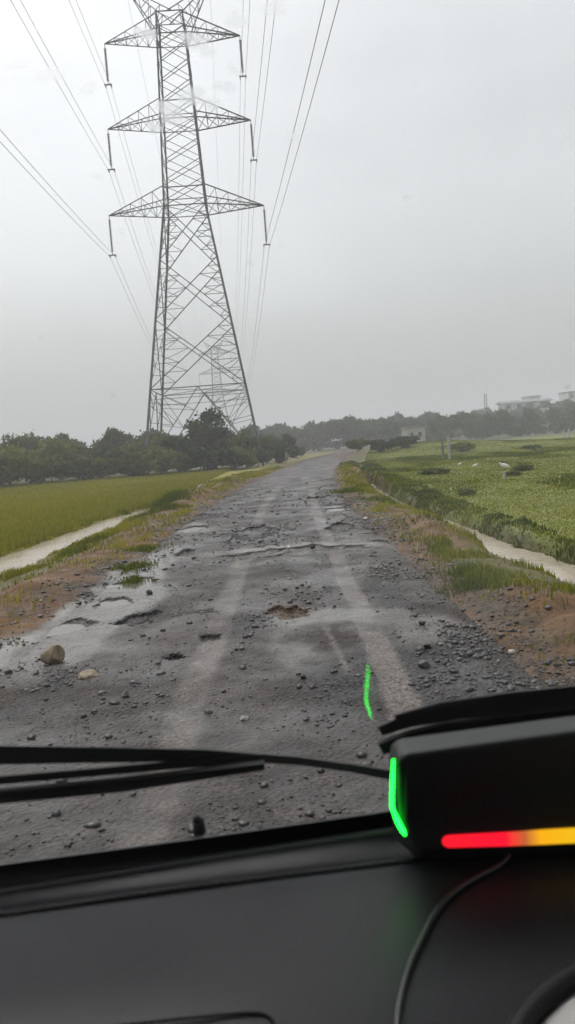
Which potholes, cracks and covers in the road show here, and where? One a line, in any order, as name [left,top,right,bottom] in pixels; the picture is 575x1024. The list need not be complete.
pothole [255,602,318,623]
pothole [166,546,204,559]
pothole [84,594,142,611]
pothole [190,630,231,644]
crack [239,549,290,560]
pothole [105,608,172,629]
pothole [152,650,200,663]
